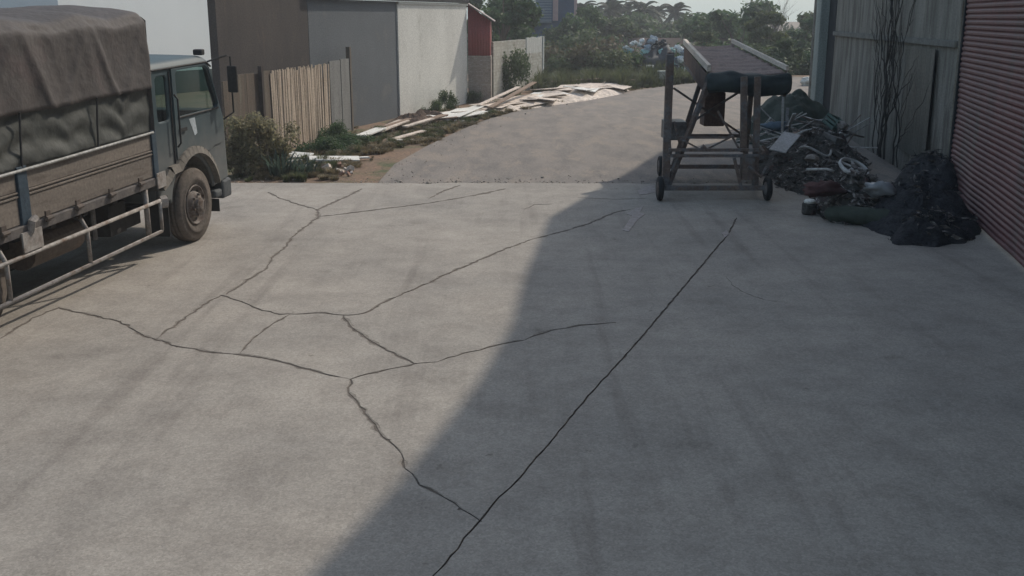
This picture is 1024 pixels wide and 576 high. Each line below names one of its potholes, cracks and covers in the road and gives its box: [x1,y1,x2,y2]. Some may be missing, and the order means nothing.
crack [1,186,777,576]
